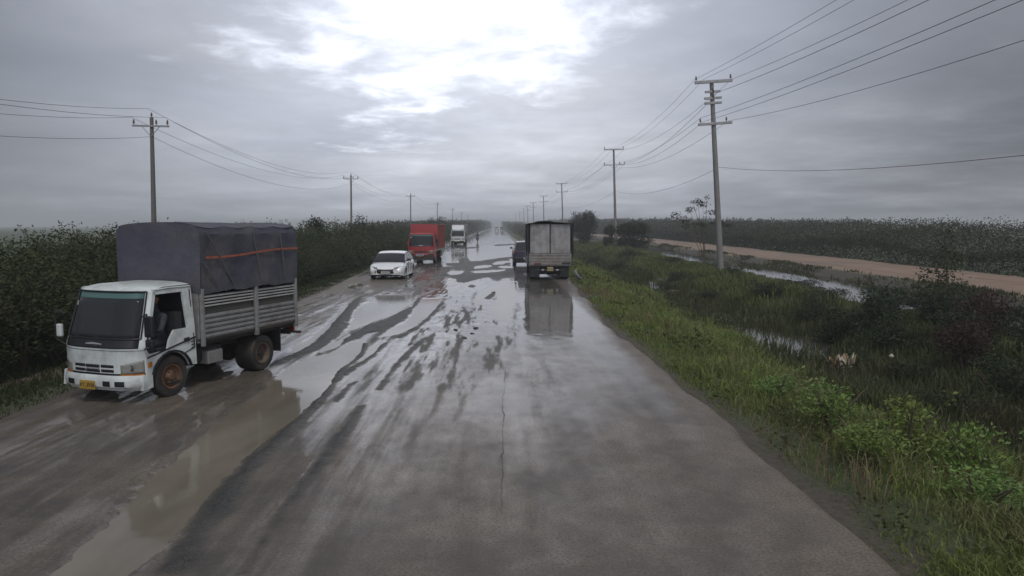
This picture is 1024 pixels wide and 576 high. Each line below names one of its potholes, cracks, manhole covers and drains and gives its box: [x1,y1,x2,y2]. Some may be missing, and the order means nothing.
pothole [472,281,519,322]
